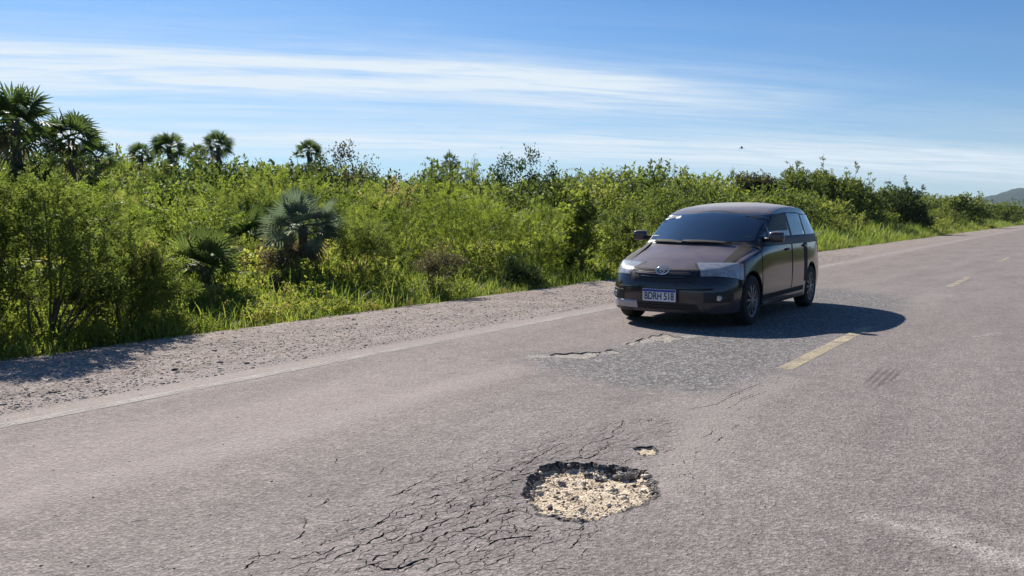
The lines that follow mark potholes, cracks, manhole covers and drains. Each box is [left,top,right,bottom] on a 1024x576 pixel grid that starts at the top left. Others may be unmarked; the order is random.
crack [690,377,781,409]
pothole [632,446,659,457]
crack [240,417,679,576]
pothole [520,461,661,525]
